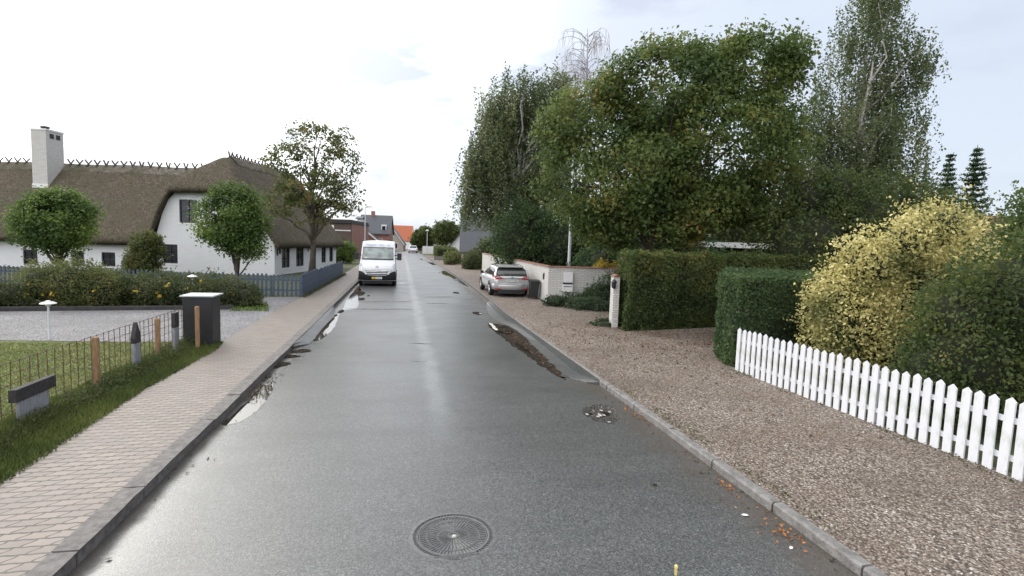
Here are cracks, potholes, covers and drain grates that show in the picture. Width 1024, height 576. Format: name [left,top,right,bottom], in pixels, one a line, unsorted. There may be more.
manhole cover [409,512,497,561]
pothole [582,404,622,424]
pothole [488,323,566,380]
